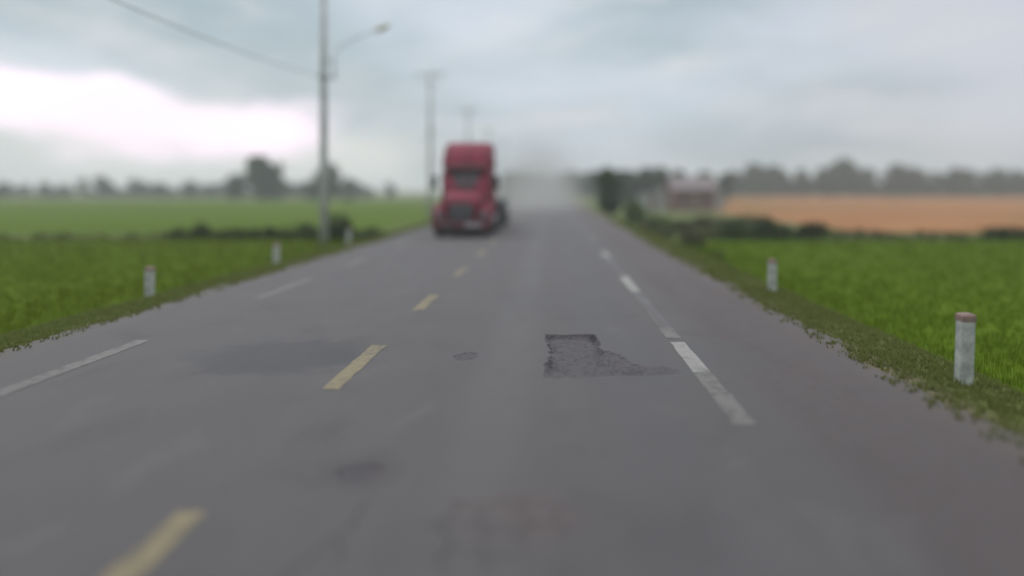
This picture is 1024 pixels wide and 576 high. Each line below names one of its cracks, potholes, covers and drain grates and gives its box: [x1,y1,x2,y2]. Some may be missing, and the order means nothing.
pothole [543,334,683,378]
pothole [452,352,479,361]
